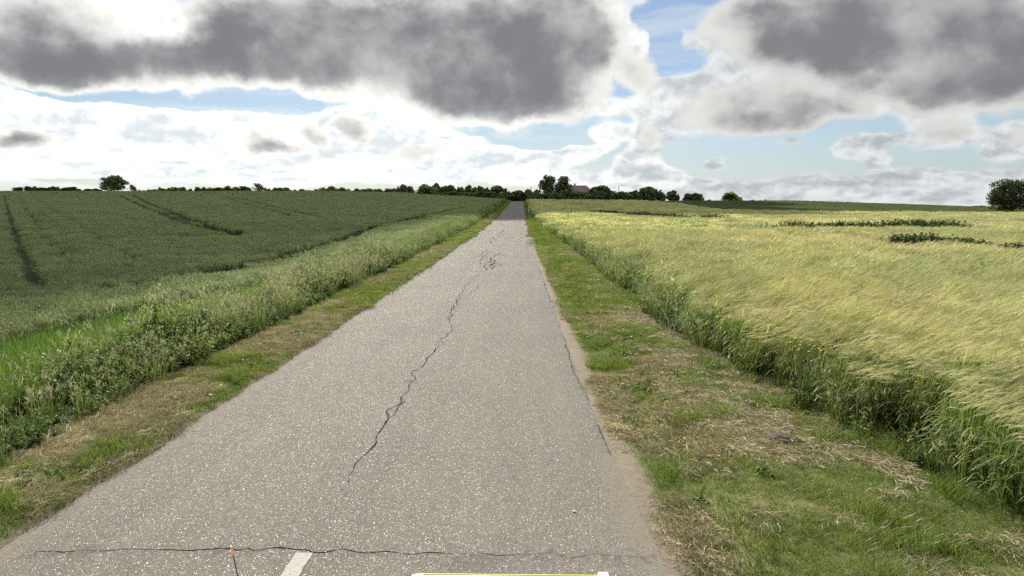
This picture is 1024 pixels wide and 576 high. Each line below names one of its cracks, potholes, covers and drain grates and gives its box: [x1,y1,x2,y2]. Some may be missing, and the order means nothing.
crack [52,548,506,556]
crack [348,230,505,483]
